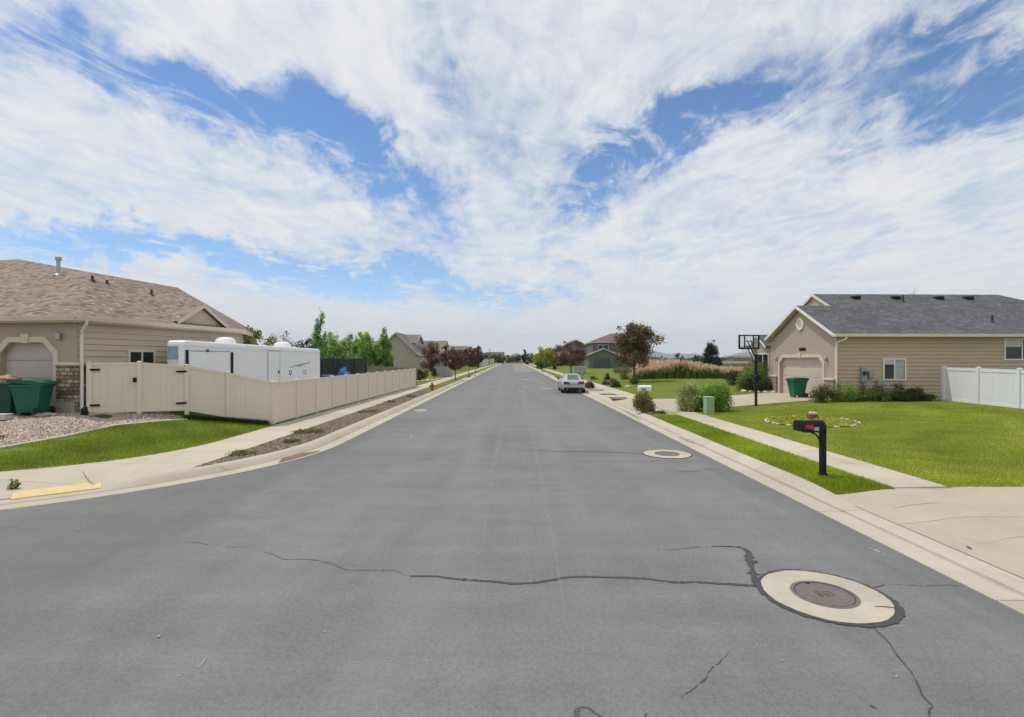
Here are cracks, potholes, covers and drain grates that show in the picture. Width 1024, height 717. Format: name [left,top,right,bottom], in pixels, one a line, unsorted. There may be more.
manhole cover [755,569,905,628]
crack [681,651,729,697]
crack [870,628,933,717]
manhole cover [642,450,692,459]
crack [266,552,409,576]
